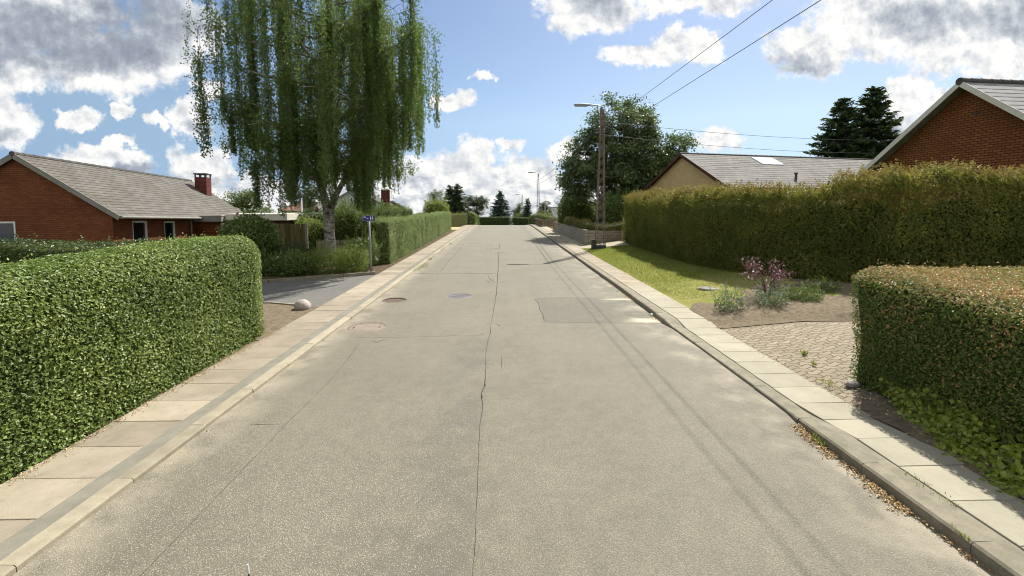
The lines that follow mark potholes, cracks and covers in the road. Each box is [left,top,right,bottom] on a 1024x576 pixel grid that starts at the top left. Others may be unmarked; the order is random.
manhole cover [346,322,387,332]
